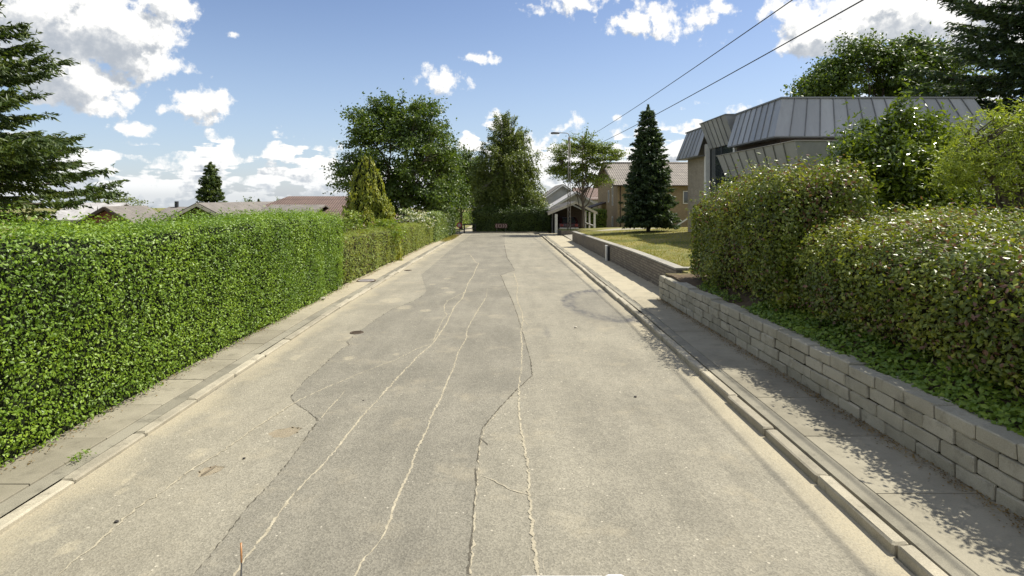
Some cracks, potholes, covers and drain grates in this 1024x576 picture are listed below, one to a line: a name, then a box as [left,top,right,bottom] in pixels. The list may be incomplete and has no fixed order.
crack [57,255,488,576]
crack [466,246,540,576]
